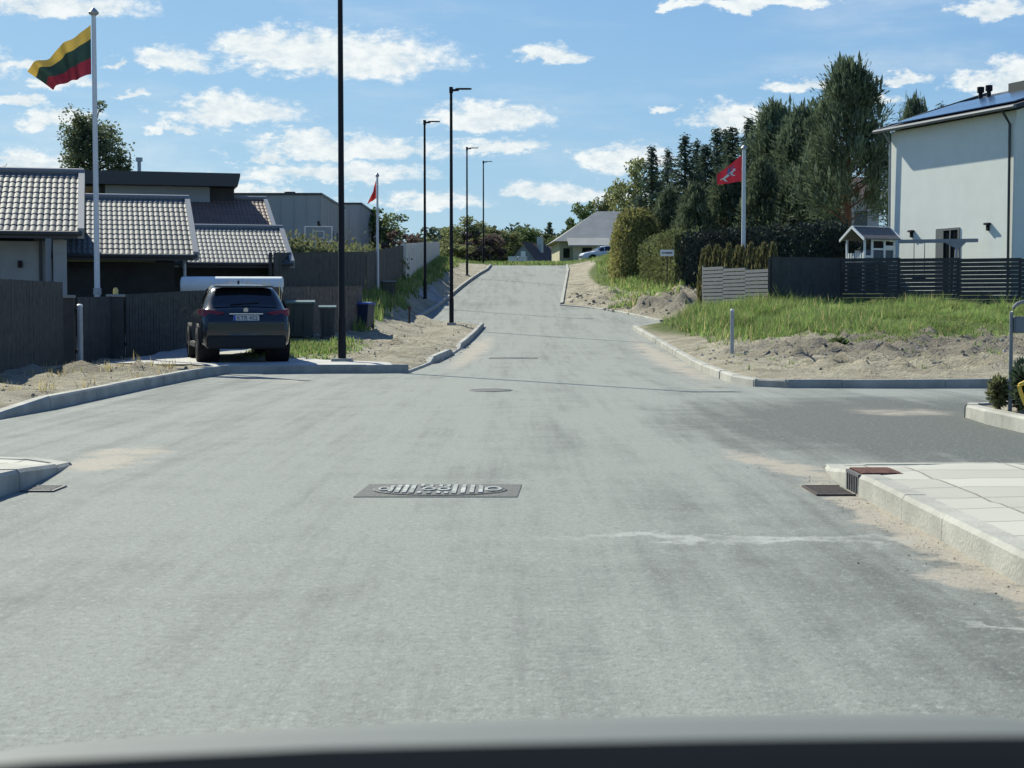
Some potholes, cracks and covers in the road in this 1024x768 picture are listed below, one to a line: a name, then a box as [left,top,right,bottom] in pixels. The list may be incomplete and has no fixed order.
drain grate [802,467,903,496]
manhole cover [353,484,522,497]
